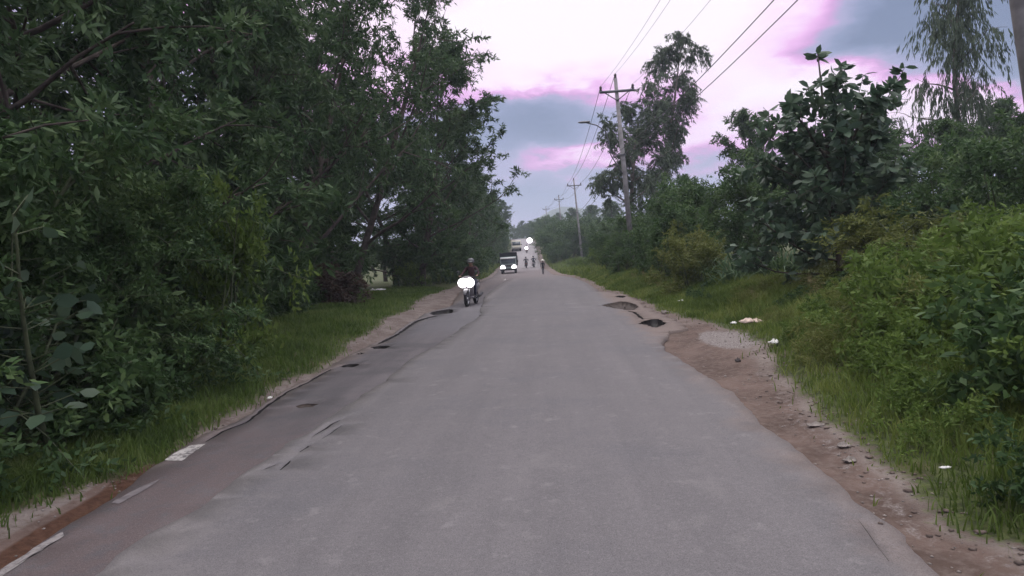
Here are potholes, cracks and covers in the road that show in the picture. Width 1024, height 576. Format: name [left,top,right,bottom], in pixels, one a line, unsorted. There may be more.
pothole [639,319,666,328]
crack [207,369,341,470]
pothole [602,302,638,310]
